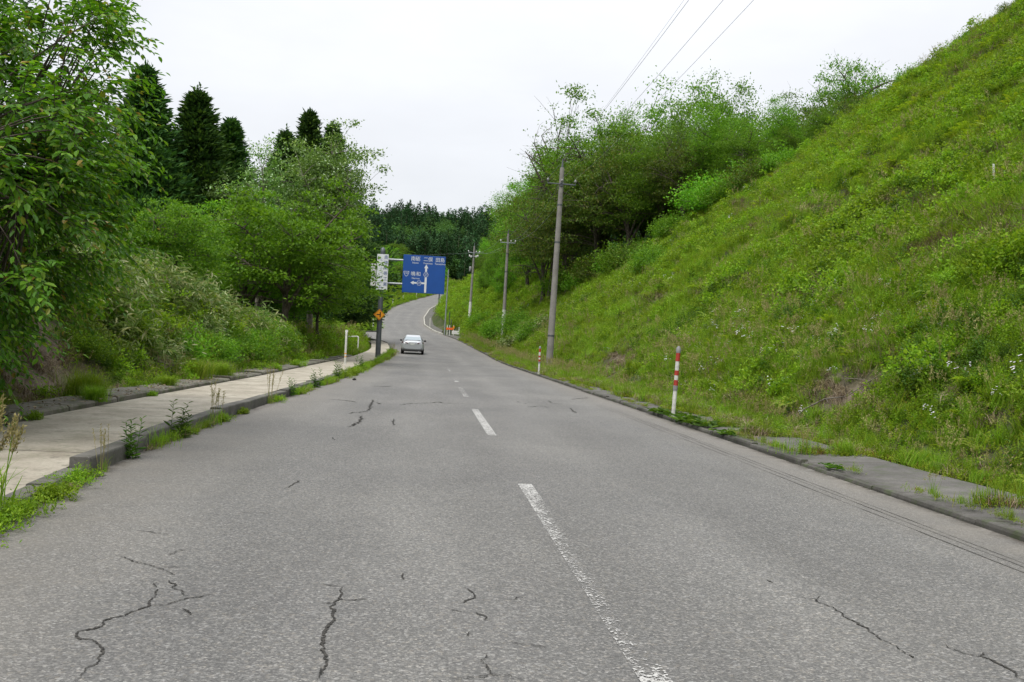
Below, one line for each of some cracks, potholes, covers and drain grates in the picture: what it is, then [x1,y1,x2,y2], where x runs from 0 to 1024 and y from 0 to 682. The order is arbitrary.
crack [319,584,364,678]
crack [72,549,214,682]
crack [946,645,1020,678]
crack [331,386,466,440]
